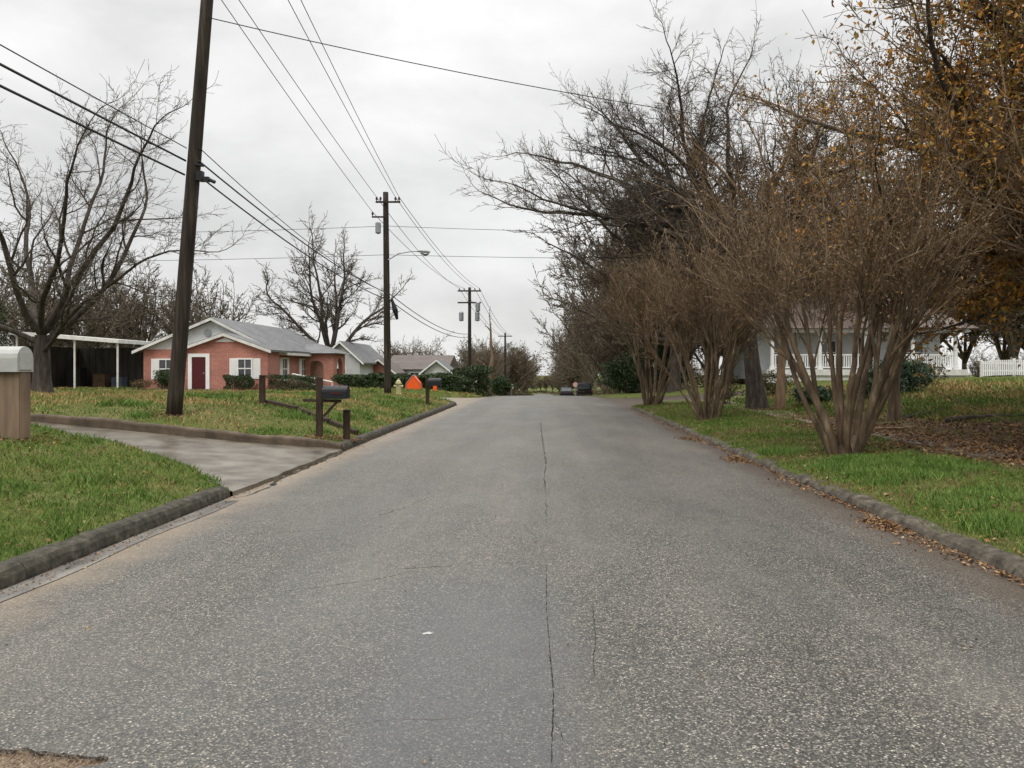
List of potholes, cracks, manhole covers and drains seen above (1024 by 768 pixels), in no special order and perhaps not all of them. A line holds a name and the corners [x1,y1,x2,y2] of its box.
pothole [0,748,108,768]
crack [208,566,446,602]
